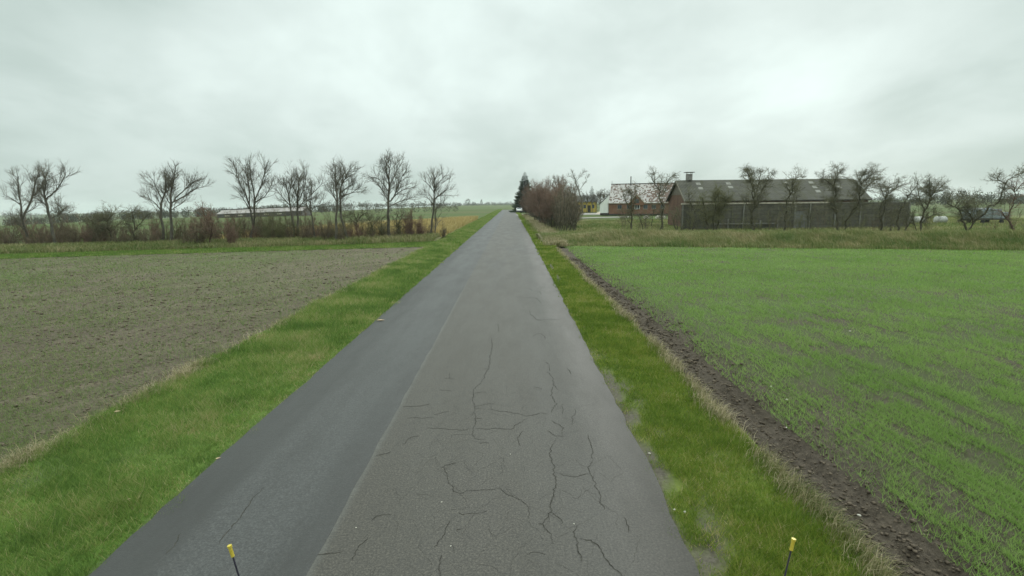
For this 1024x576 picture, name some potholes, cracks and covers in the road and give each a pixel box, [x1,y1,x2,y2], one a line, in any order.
crack [346,324,641,576]
